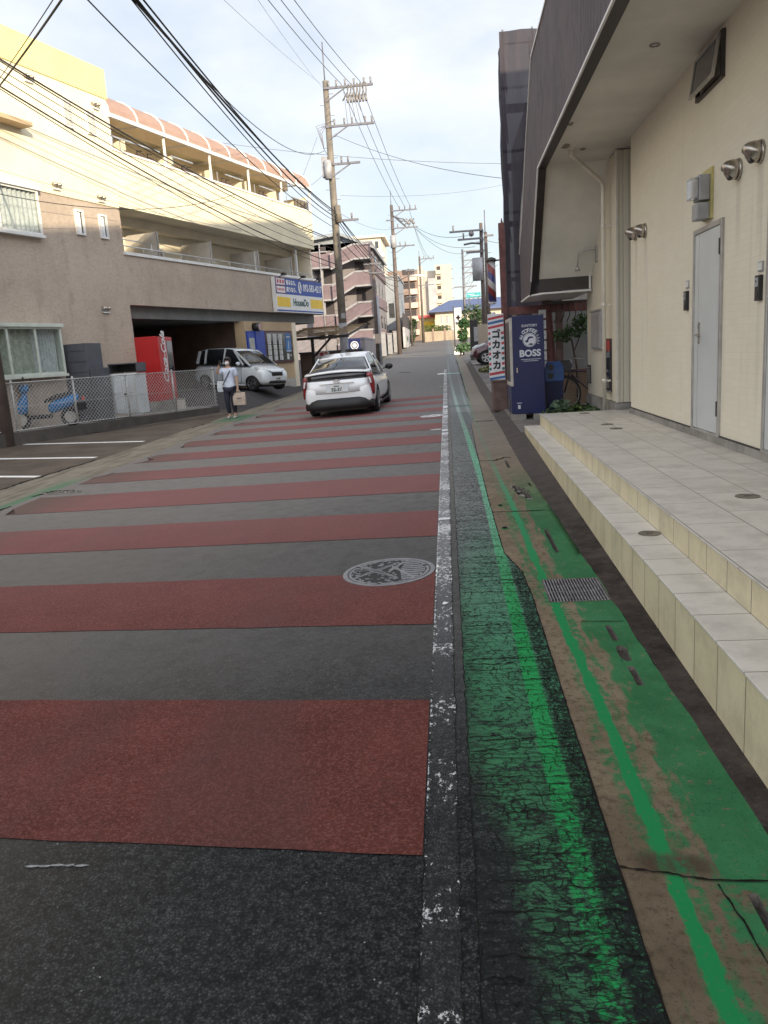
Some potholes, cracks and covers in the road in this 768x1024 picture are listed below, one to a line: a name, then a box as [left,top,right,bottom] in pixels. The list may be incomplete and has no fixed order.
drain grate [541,577,612,602]
manhole cover [343,558,435,586]
